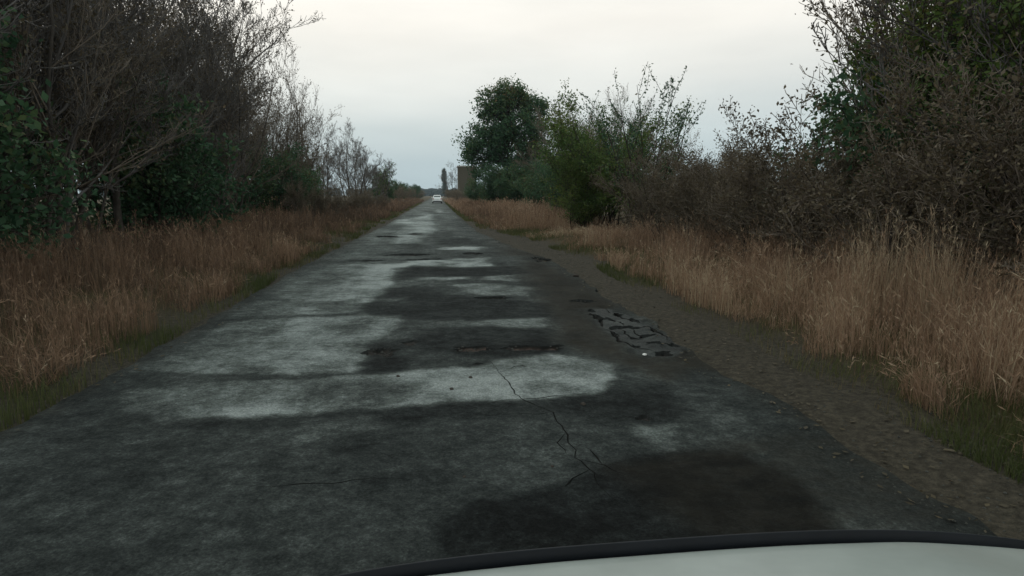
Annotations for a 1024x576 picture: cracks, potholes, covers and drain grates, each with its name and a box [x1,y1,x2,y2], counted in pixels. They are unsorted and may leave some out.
pothole [360,346,401,357]
crack [261,477,393,487]
crack [588,309,679,351]
crack [478,361,631,508]
